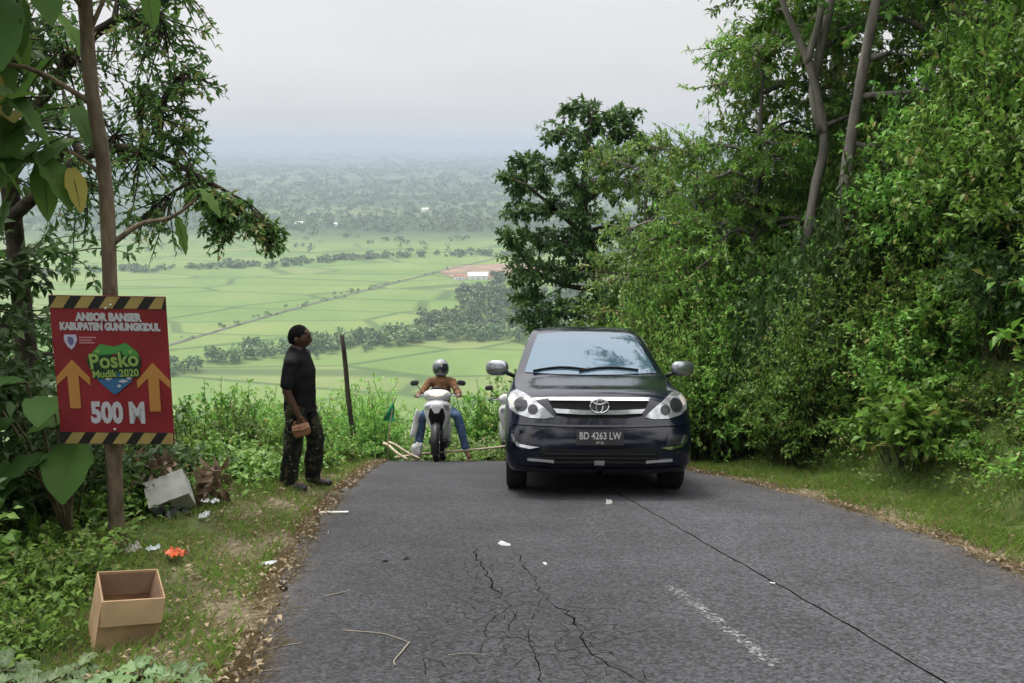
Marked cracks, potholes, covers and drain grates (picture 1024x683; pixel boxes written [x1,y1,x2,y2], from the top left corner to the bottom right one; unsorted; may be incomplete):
crack [406,546,646,683]
